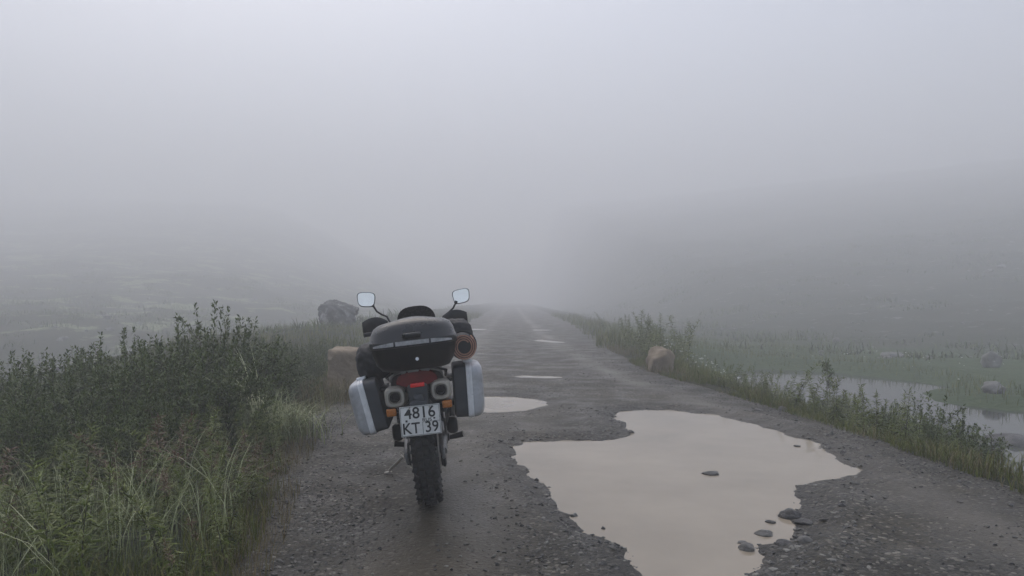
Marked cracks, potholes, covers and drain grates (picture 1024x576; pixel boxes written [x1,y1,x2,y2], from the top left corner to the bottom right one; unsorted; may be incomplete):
pothole [475,402,911,576]
pothole [482,392,568,414]
